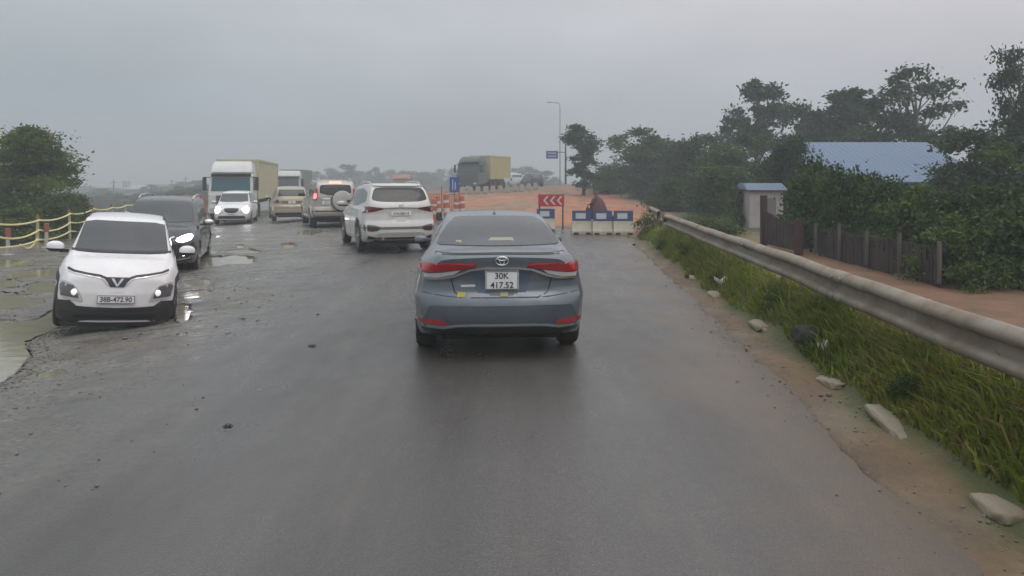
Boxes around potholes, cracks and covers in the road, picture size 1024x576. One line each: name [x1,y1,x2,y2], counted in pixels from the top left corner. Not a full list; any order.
pothole [1,268,58,279]
pothole [0,259,41,271]
pothole [294,228,328,236]
pothole [0,310,60,384]
pothole [0,277,27,292]
pothole [177,255,259,268]
pothole [177,289,216,300]
pothole [175,303,198,323]
pothole [30,368,74,379]
pothole [178,278,216,288]
pothole [0,291,50,310]
pothole [215,422,241,432]
